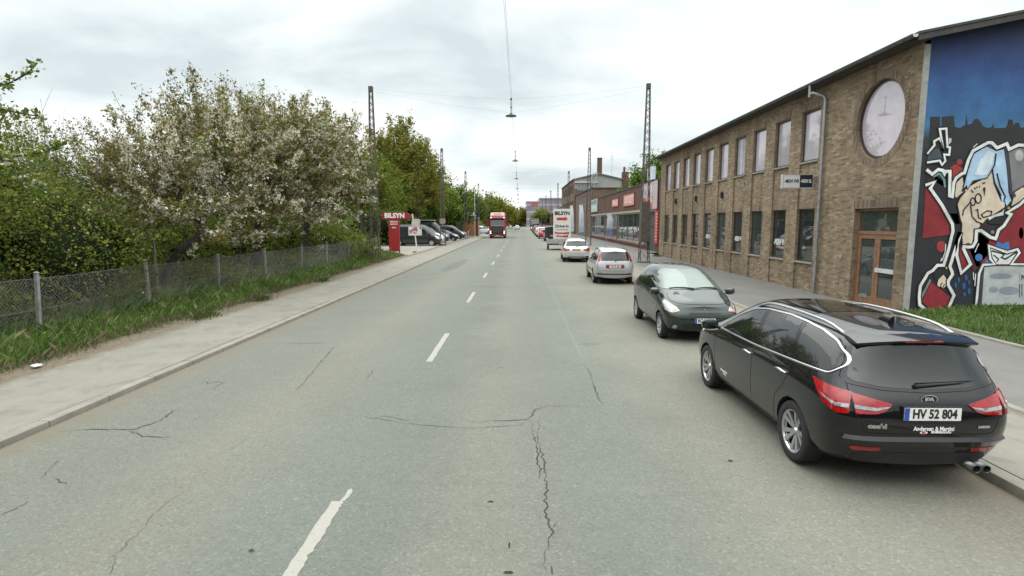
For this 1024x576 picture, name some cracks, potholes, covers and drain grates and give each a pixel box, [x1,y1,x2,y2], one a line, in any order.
crack [58,409,177,438]
crack [365,368,604,574]
